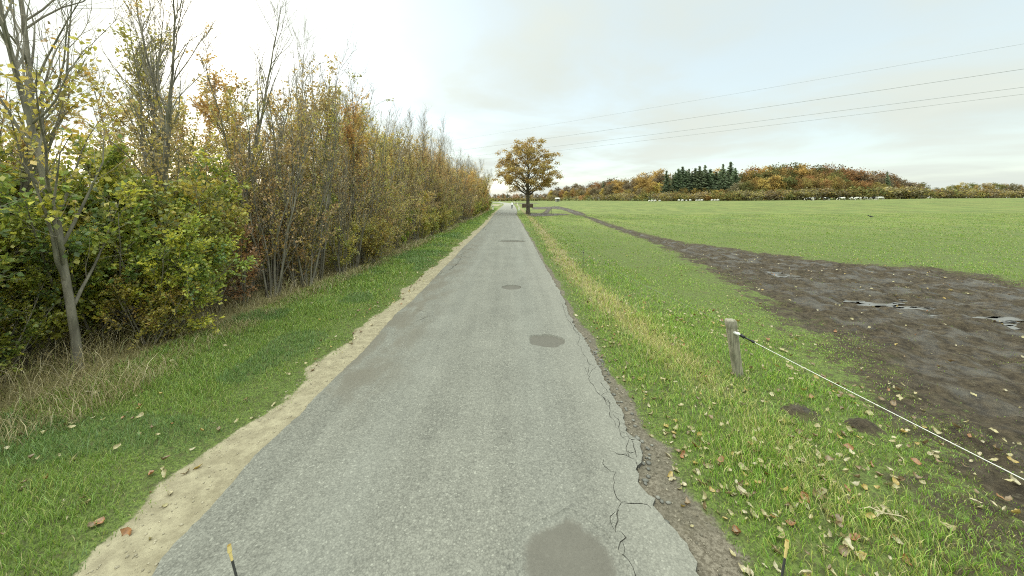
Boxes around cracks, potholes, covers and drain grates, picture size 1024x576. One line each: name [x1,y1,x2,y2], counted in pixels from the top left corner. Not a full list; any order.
crack [562,304,647,576]
